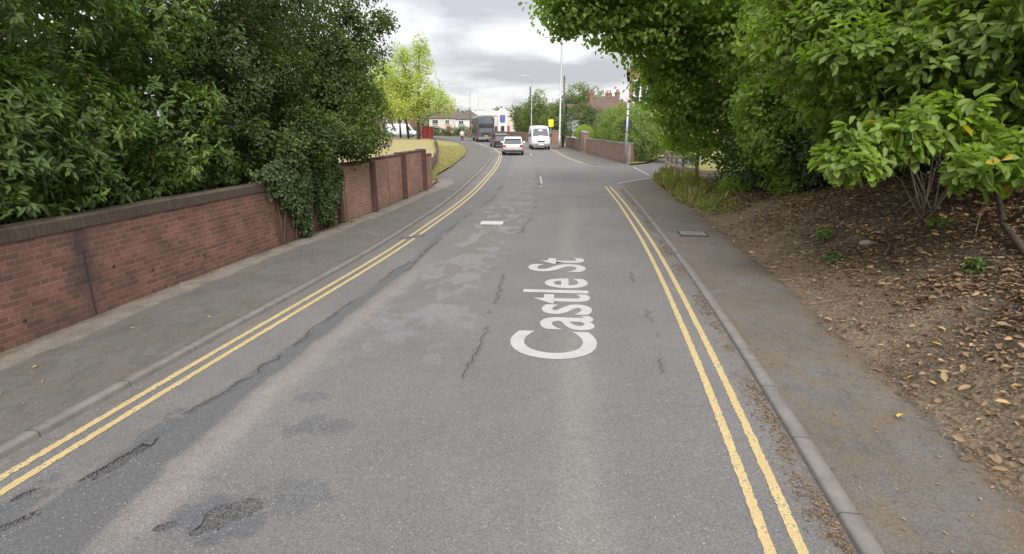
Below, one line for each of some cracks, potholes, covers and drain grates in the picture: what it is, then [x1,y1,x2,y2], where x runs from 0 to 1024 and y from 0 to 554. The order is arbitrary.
crack [627,271,678,389]
crack [396,168,543,422]
pothole [65,431,169,489]
crack [139,258,415,445]
pothole [0,503,58,537]
pothole [170,491,278,546]
pothole [0,481,55,510]
pothole [137,512,205,541]
